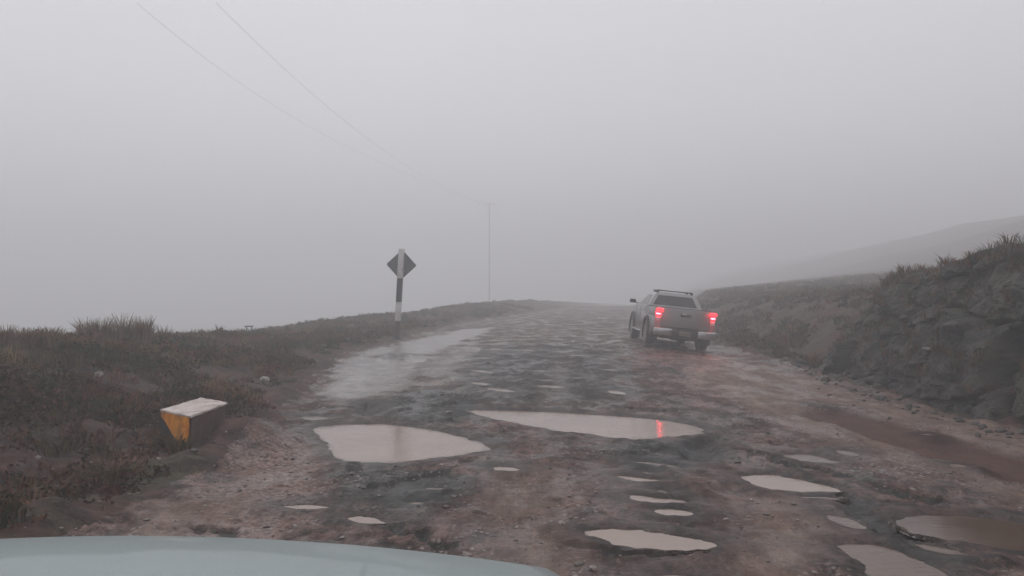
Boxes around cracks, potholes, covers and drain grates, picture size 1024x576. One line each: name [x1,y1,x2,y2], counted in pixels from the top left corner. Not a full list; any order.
pothole [816,511,876,532]
pothole [888,510,1024,551]
pothole [910,541,979,556]
pothole [780,451,845,464]
pothole [579,523,726,555]
pothole [826,538,964,576]
pothole [274,500,338,509]
pothole [623,490,694,504]
pothole [310,421,497,463]
pothole [648,504,701,516]
pothole [341,511,403,524]
pothole [831,447,866,456]
